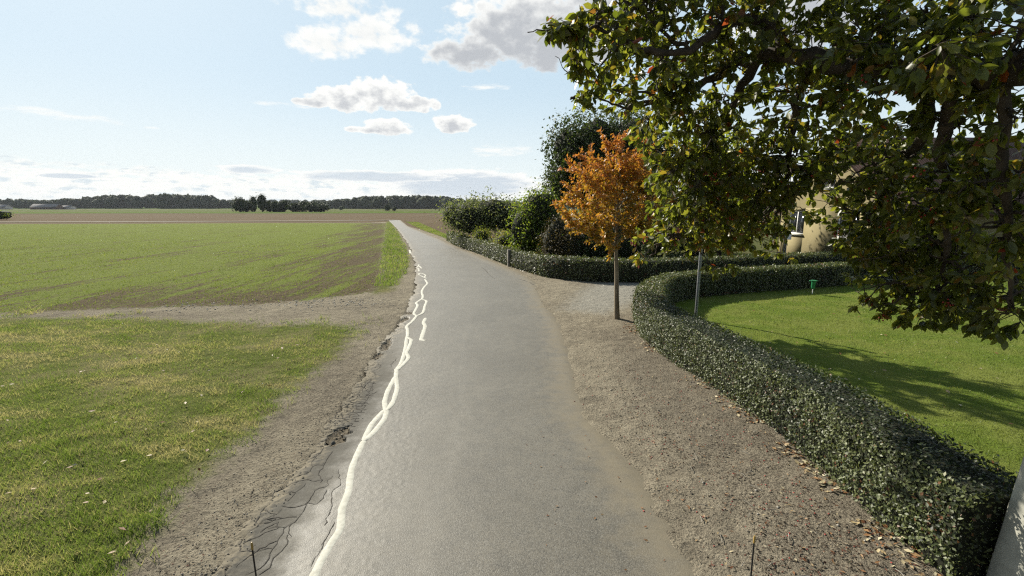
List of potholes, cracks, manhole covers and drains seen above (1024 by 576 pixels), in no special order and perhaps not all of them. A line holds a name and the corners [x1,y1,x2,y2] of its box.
crack [216,446,341,576]
pothole [326,427,350,447]
